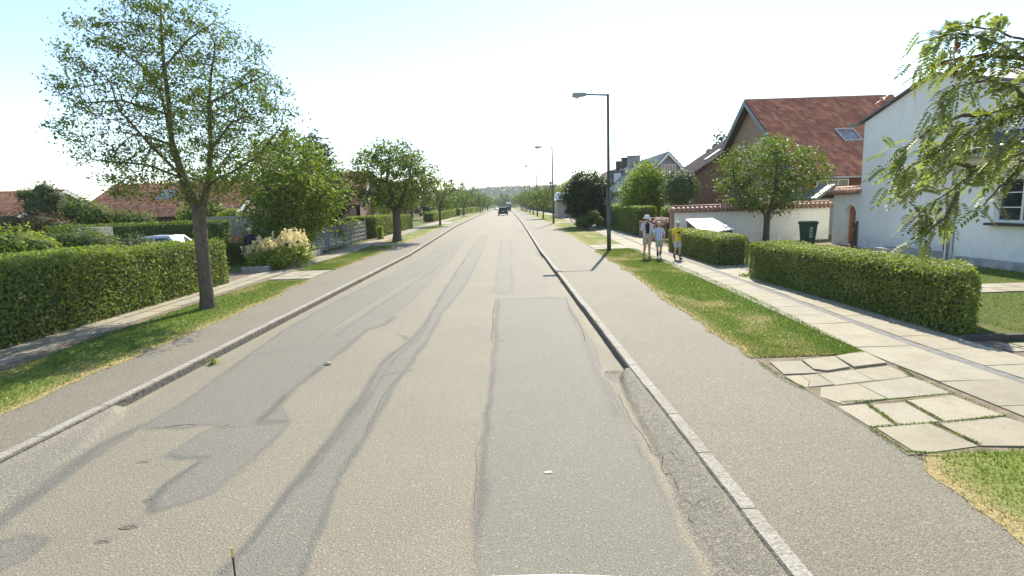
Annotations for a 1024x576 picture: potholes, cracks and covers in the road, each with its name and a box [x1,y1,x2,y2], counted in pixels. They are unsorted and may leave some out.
crack [618,380,705,522]
